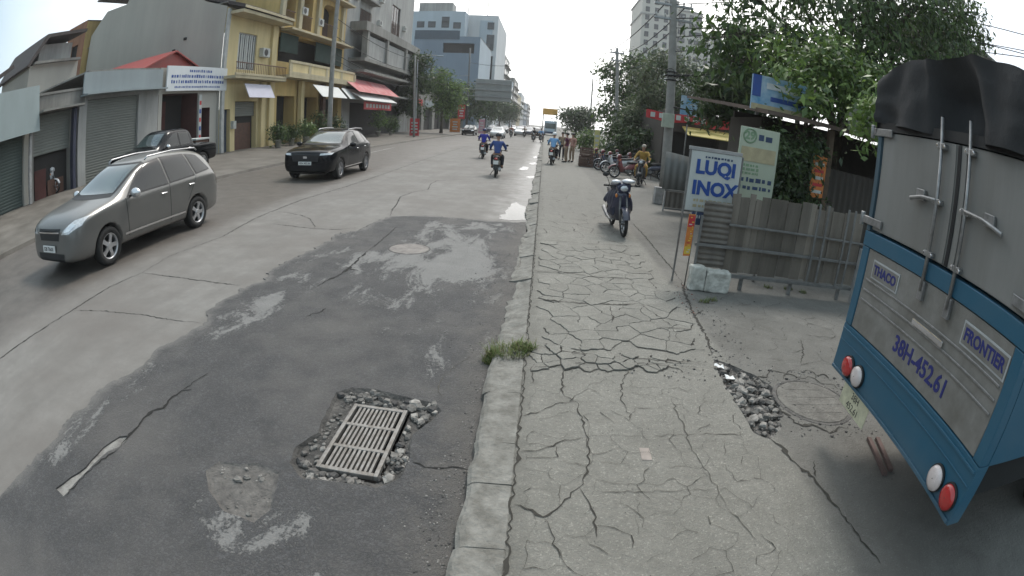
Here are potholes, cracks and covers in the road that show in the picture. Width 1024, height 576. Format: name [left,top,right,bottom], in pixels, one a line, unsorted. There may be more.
manhole cover [772,380,852,426]
pothole [714,359,783,439]
drain grate [315,403,410,484]
crack [414,462,467,474]
crack [68,373,208,494]
manhole cover [388,243,430,255]
crack [318,180,441,286]
crack [520,183,880,576]
